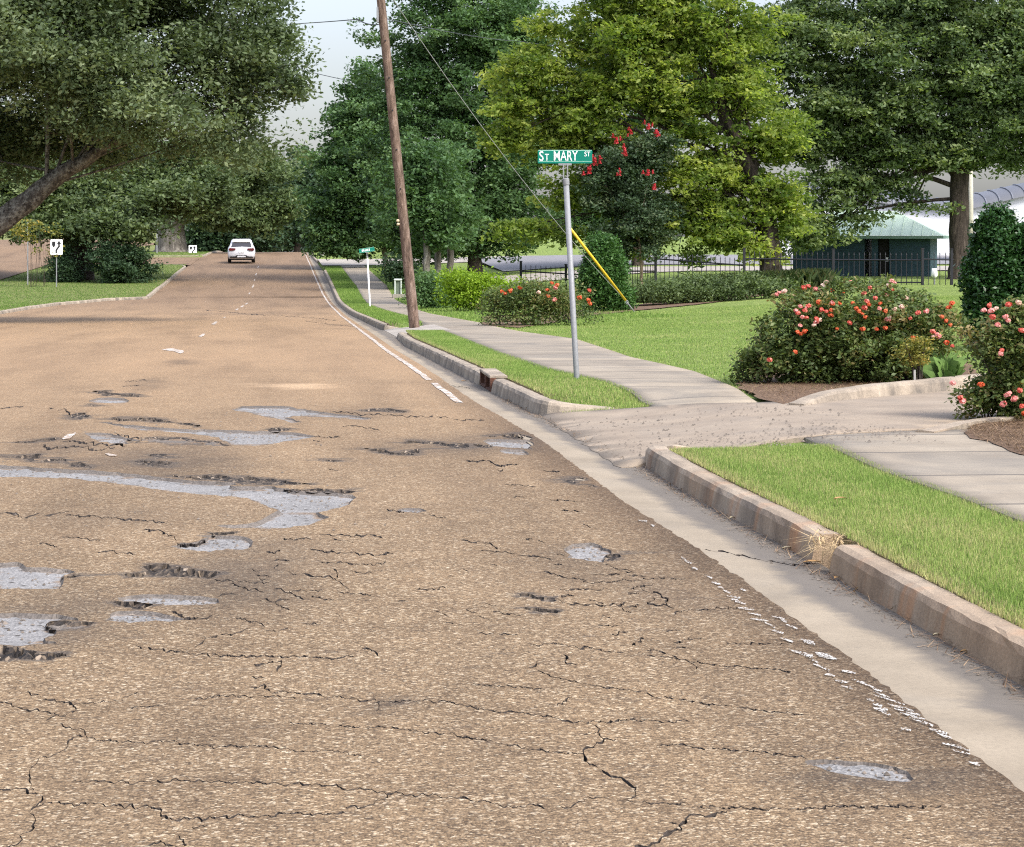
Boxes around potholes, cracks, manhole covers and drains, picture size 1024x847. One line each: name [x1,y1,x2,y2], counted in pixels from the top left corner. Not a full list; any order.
pothole [114,601,153,609]
pothole [0,612,79,646]
crack [43,434,142,451]
pothole [484,439,534,449]
pothole [118,594,219,605]
pothole [232,406,371,423]
pothole [805,759,913,782]
pothole [101,422,315,445]
pothole [107,610,189,623]
pothole [46,620,95,633]
pothole [85,433,140,445]
crack [313,411,484,442]
